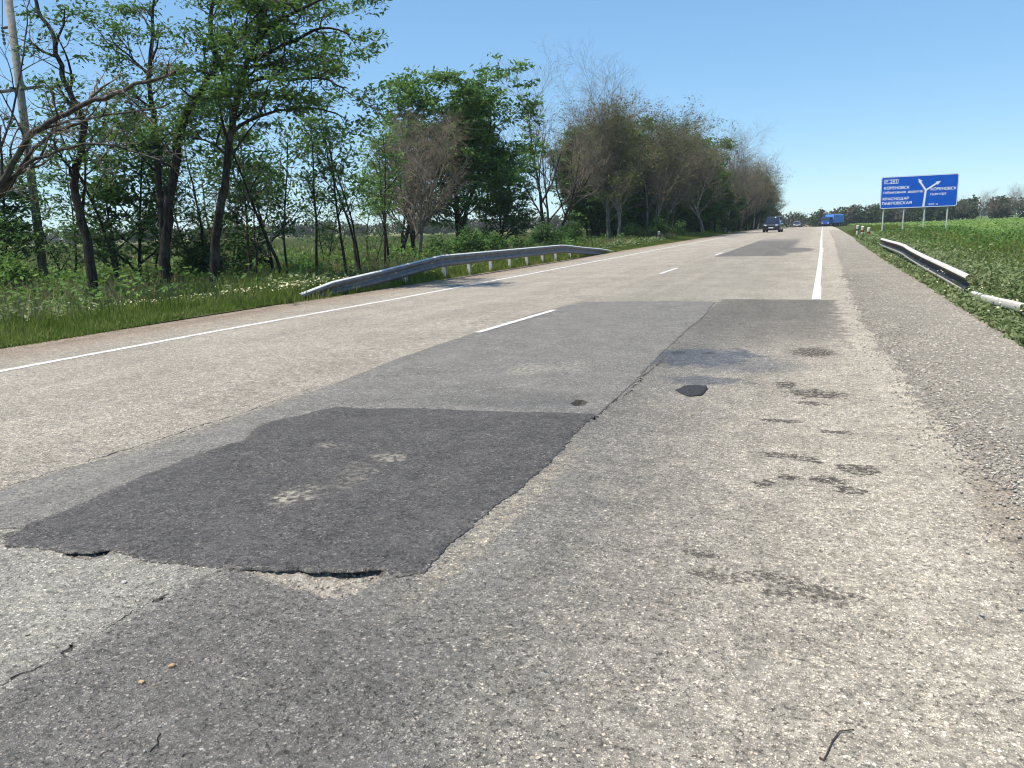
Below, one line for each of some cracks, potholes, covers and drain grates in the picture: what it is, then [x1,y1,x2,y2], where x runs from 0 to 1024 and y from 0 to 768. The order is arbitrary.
crack [0,594,168,687]
pothole [246,570,386,599]
pothole [63,551,112,560]
